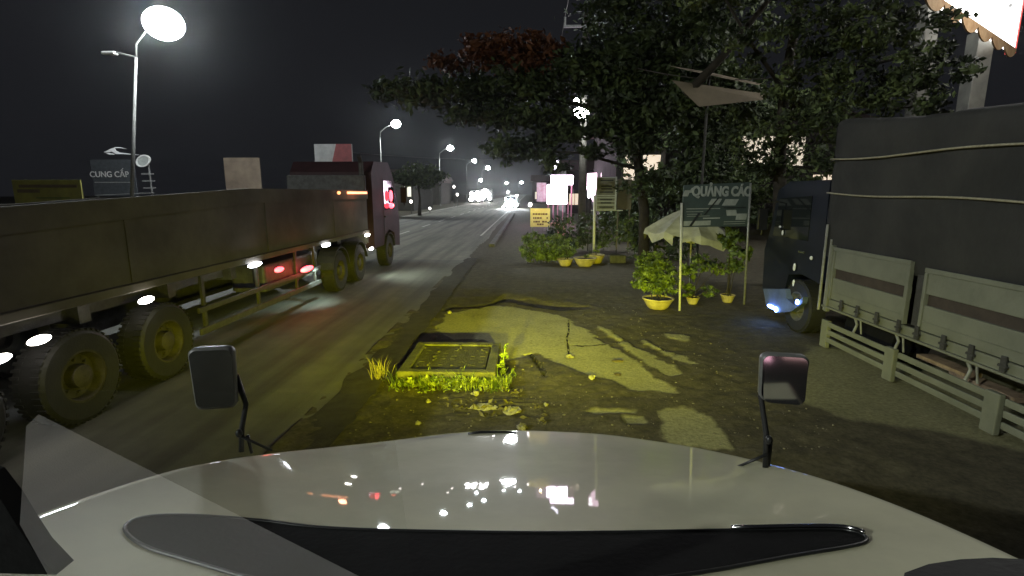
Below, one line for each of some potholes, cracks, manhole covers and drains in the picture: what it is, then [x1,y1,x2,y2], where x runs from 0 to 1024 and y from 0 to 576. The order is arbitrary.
manhole cover [397,342,501,384]
crack [529,354,547,377]
